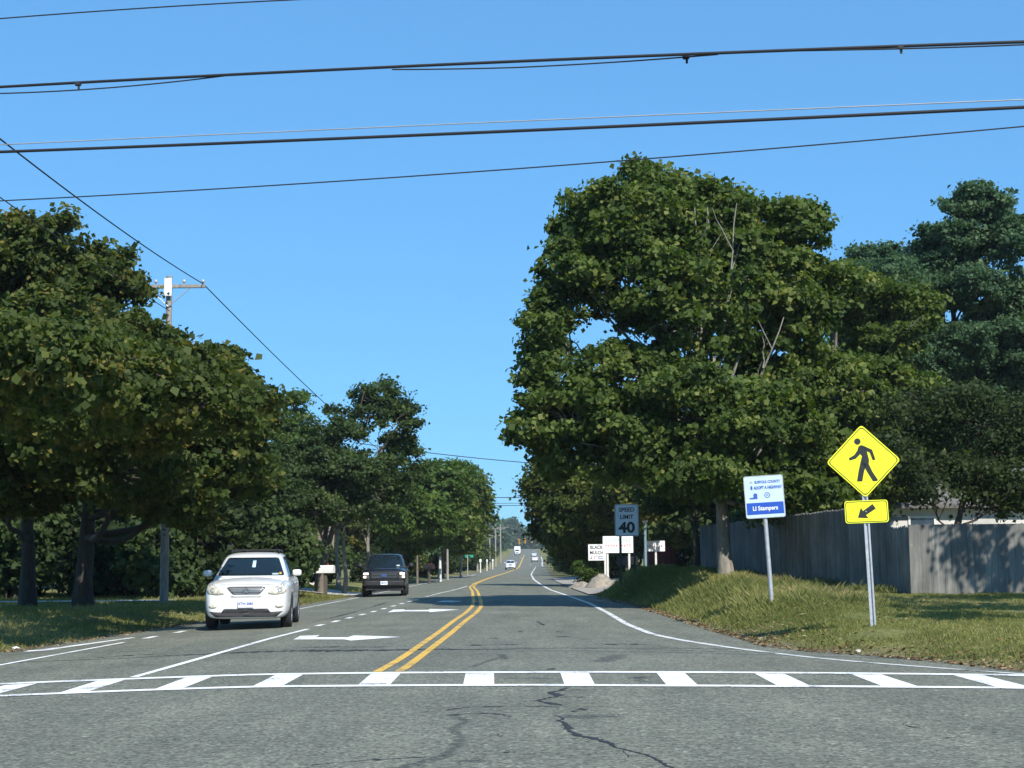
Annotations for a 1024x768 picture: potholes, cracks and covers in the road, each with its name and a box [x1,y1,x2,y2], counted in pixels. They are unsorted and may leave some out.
crack [446,684,675,768]
